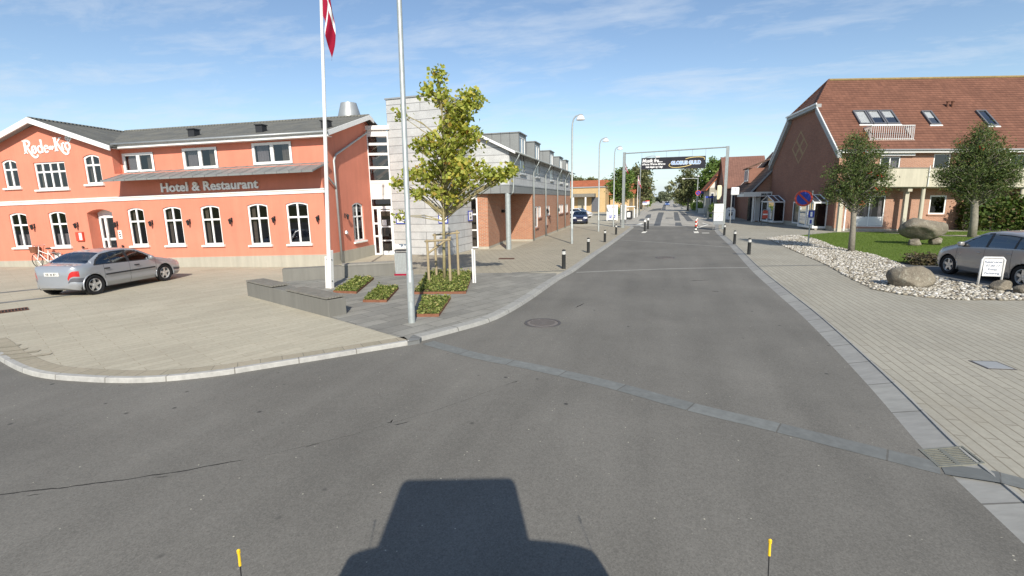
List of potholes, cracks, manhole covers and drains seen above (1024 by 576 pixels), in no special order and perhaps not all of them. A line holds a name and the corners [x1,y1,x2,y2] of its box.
drain grate [919,446,986,468]
crack [0,459,247,496]
manhole cover [524,318,561,328]
